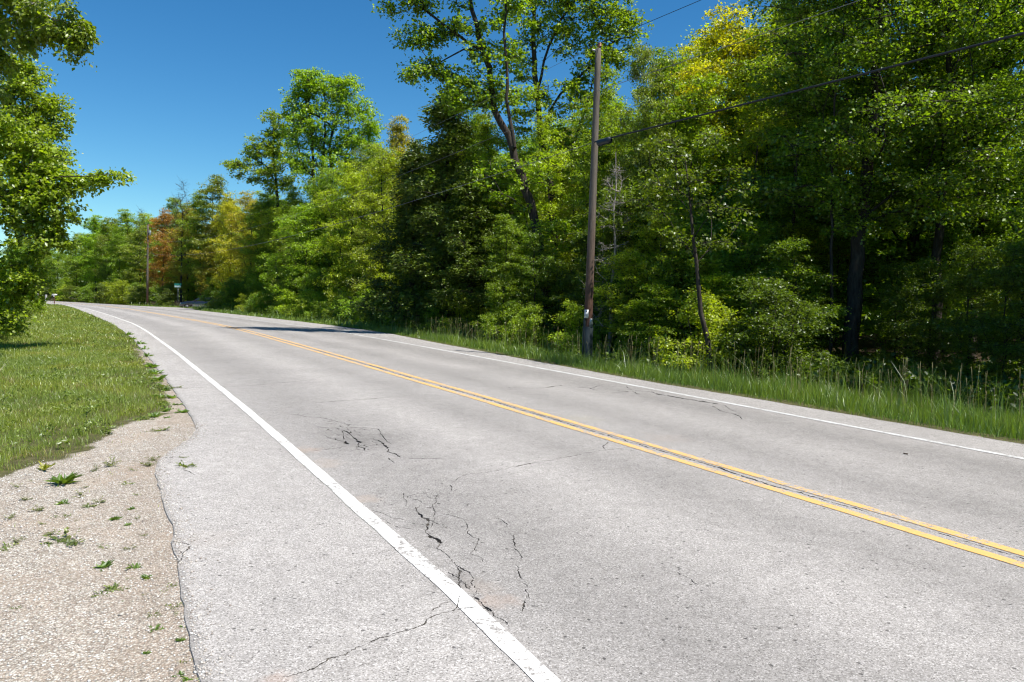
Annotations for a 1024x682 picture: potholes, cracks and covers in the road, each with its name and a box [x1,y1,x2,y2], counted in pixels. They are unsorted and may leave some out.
crack [622,387,741,418]
crack [284,442,632,677]
